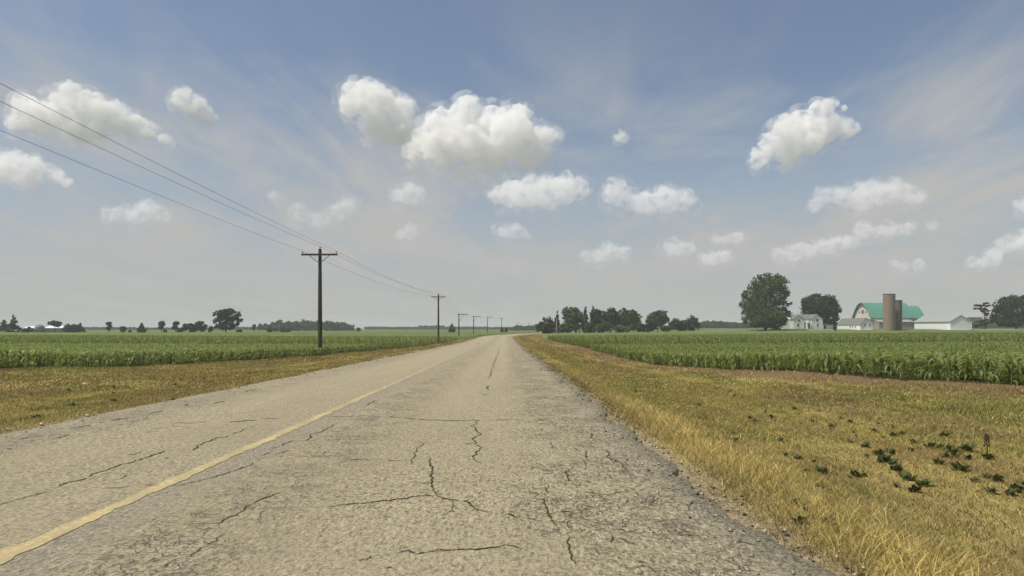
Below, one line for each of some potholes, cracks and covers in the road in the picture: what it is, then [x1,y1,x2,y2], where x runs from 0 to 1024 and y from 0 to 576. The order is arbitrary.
crack [507,433,627,564]
crack [358,544,520,568]
crack [170,400,540,486]
crack [2,404,277,504]
crack [327,442,488,513]
crack [159,491,283,567]
